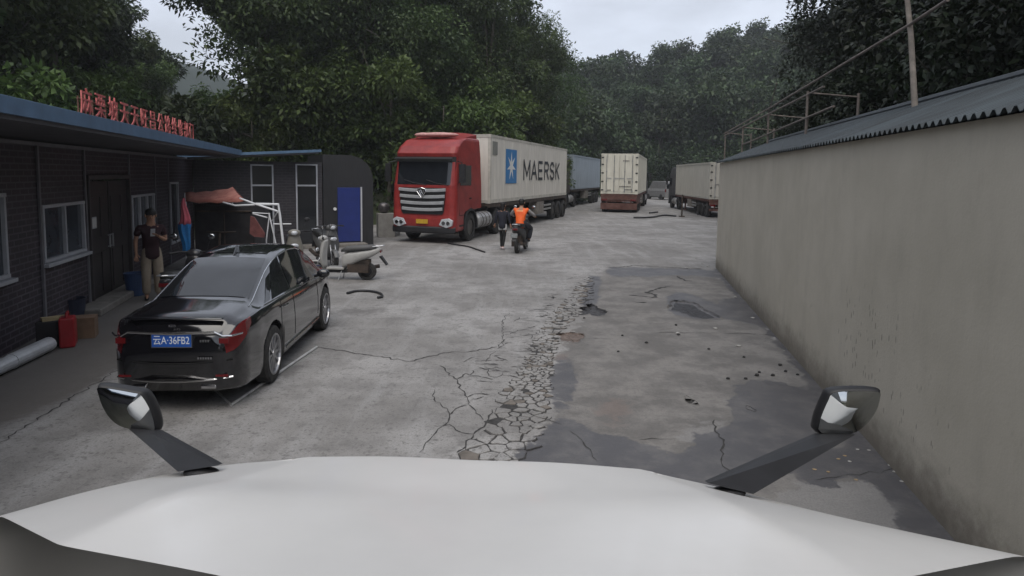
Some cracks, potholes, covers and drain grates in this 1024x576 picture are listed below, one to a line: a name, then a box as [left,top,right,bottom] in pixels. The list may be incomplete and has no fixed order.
crack [1,370,118,442]
crack [320,273,768,461]
crack [712,420,729,470]
pothole [575,302,609,317]
pothole [665,299,723,320]
